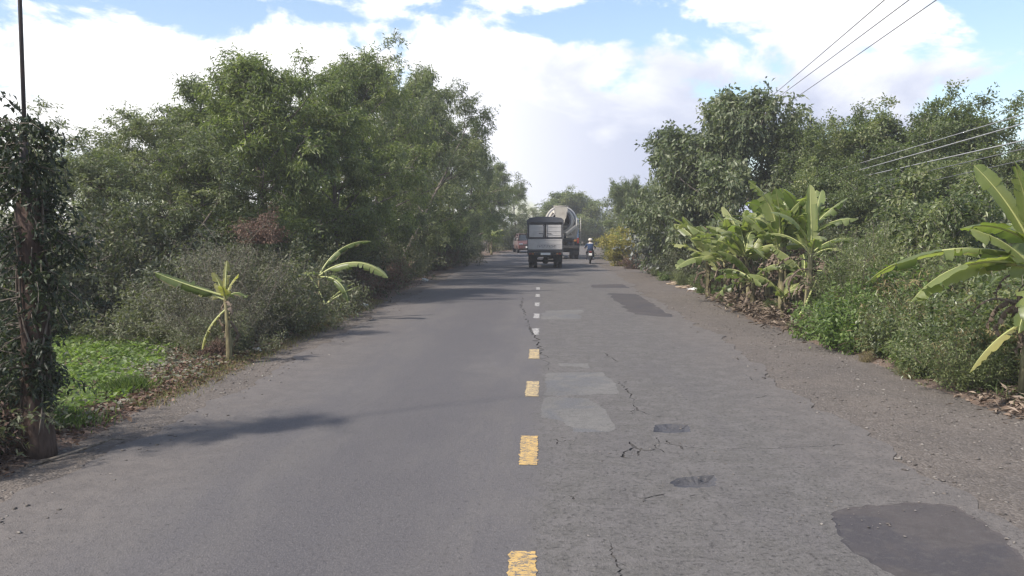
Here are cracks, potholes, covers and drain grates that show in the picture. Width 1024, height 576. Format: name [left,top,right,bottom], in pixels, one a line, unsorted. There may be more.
crack [618,381,666,417]
pothole [653,424,691,433]
crack [519,297,550,370]
pothole [670,475,717,488]
crack [609,540,624,576]
crack [620,437,698,458]
